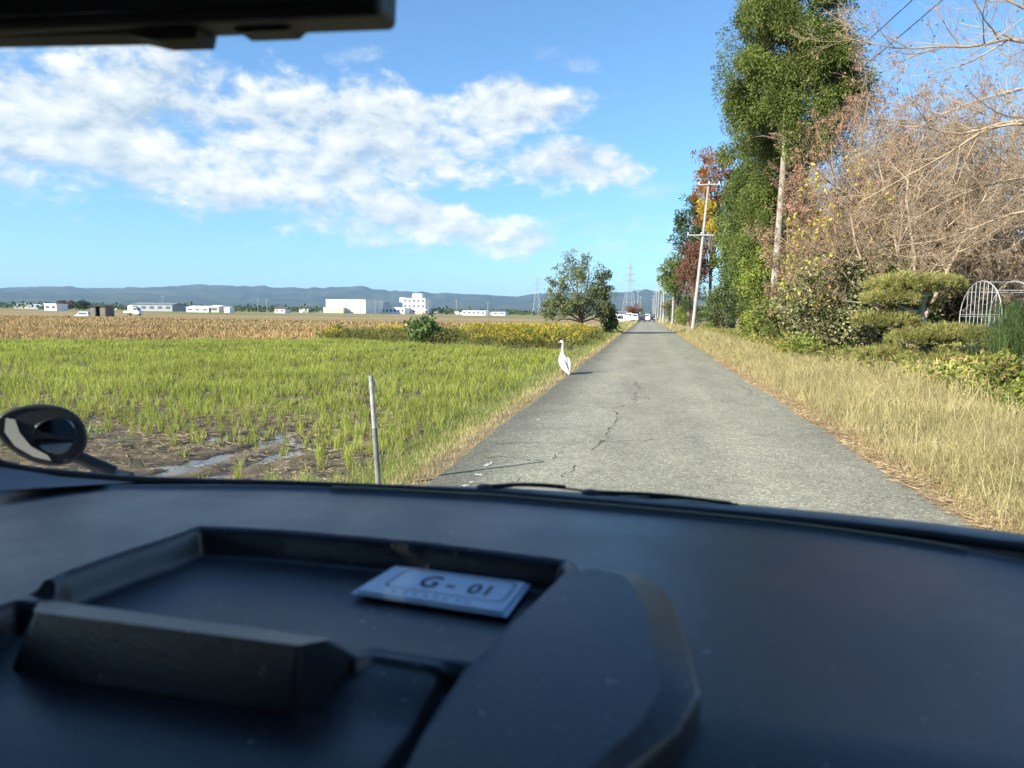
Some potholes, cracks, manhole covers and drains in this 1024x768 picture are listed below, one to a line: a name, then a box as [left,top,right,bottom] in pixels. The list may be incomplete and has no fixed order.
crack [485,382,821,477]
